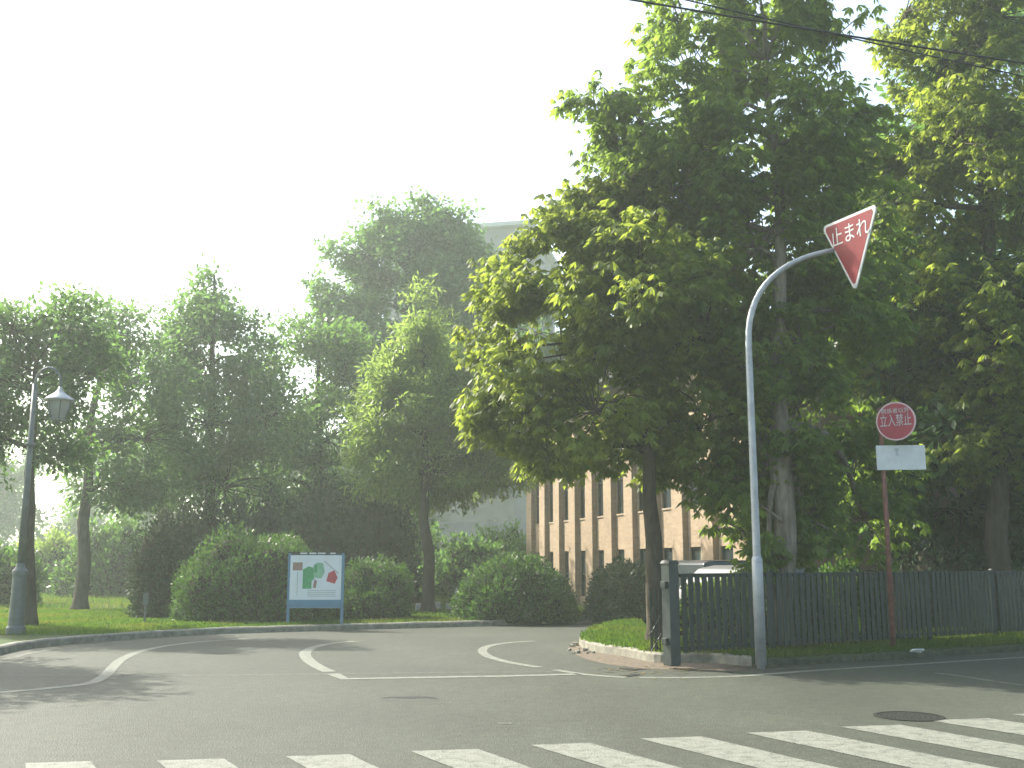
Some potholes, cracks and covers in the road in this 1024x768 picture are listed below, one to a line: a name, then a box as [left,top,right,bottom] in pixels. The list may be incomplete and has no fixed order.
manhole cover [873,711,945,722]
